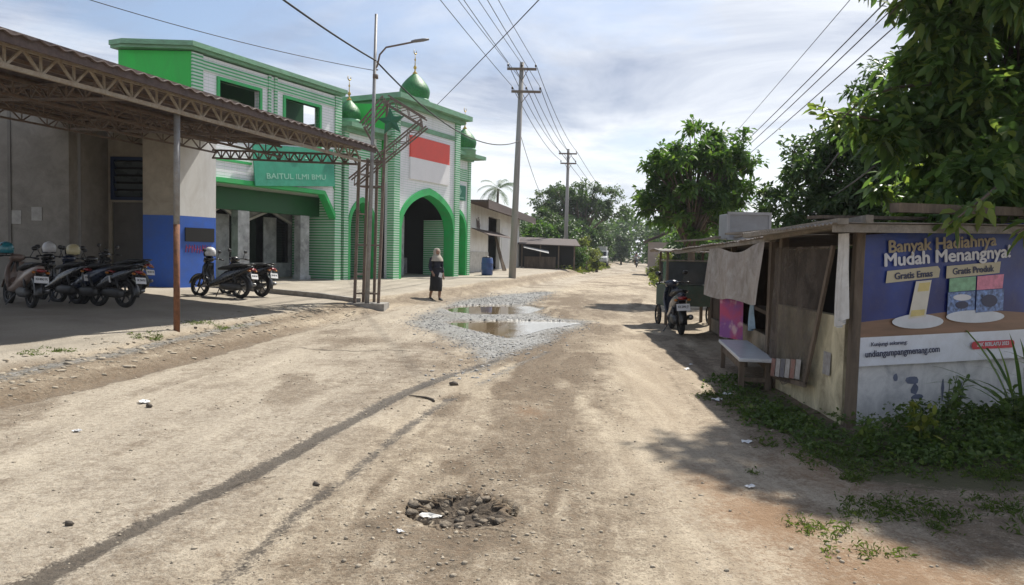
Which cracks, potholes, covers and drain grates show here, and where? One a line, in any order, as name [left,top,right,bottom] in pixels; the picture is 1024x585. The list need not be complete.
pothole [433,318,598,341]
pothole [403,491,519,536]
pothole [429,303,558,316]
